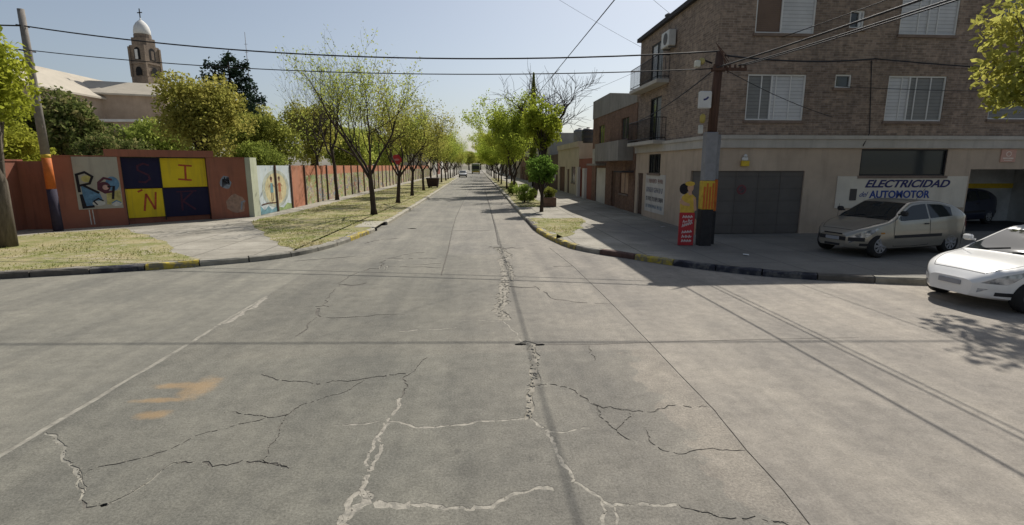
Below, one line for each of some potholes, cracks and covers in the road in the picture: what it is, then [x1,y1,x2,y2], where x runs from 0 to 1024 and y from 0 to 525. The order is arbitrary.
crack [261,246,801,525]
crack [43,379,365,509]
